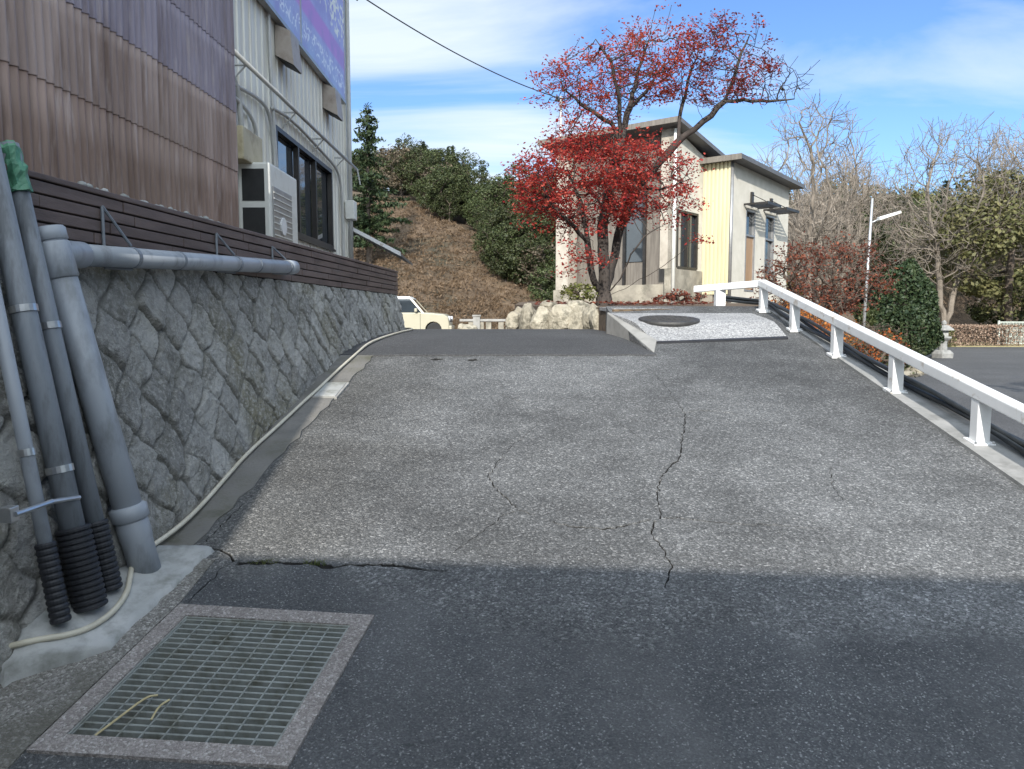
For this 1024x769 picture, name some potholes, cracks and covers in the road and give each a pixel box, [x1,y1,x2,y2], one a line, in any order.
crack [566,362,690,588]
manhole cover [638,315,700,327]
drain grate [26,604,374,769]
